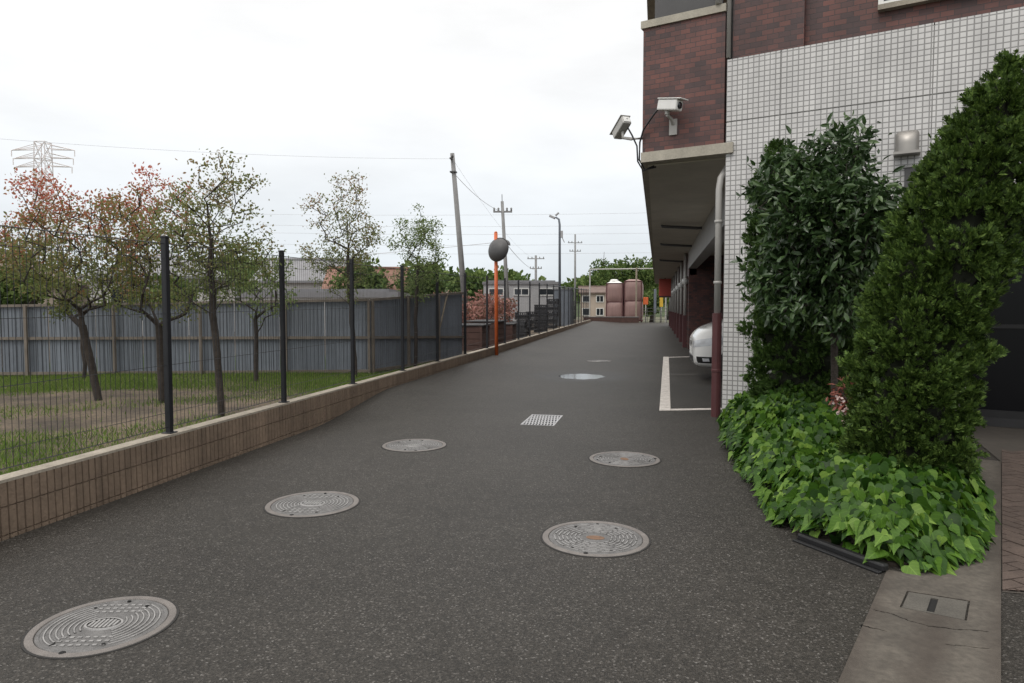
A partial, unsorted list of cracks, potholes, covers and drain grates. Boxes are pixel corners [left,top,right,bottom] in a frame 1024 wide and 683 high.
manhole cover [540,520,651,558]
manhole cover [588,451,661,468]
manhole cover [20,595,179,660]
drain grate [520,414,563,426]
manhole cover [263,491,361,518]
manhole cover [381,439,447,452]
